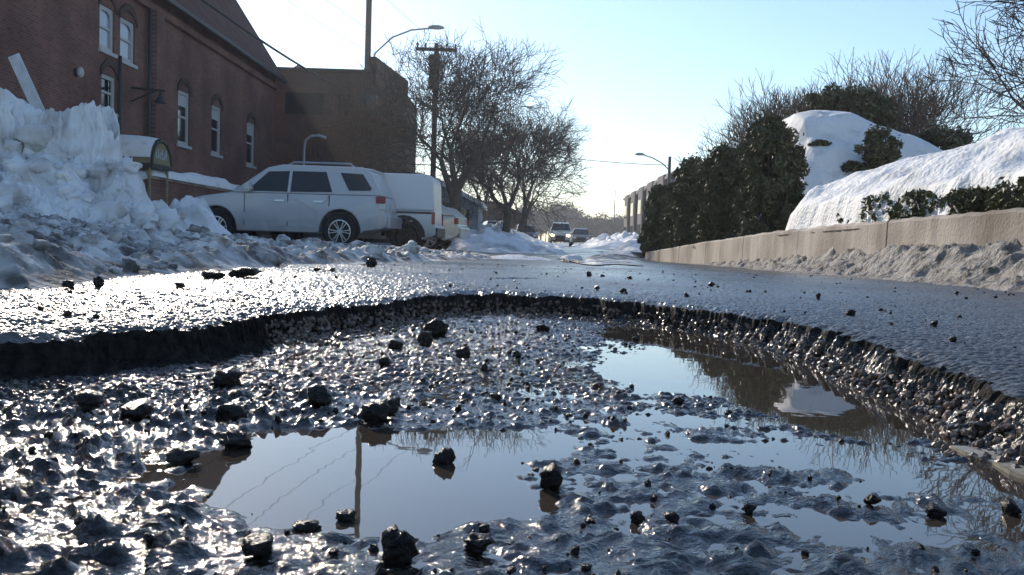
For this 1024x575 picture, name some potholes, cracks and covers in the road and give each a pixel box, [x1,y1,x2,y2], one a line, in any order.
pothole [0,293,1024,575]
